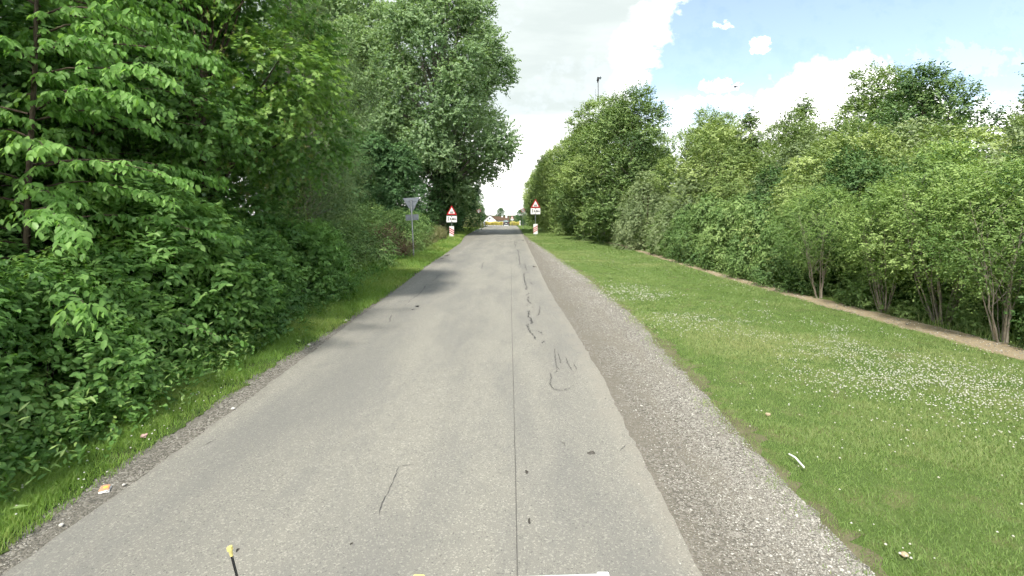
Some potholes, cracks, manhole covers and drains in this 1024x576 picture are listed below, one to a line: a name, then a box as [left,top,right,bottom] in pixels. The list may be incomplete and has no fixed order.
crack [511,241,577,576]
